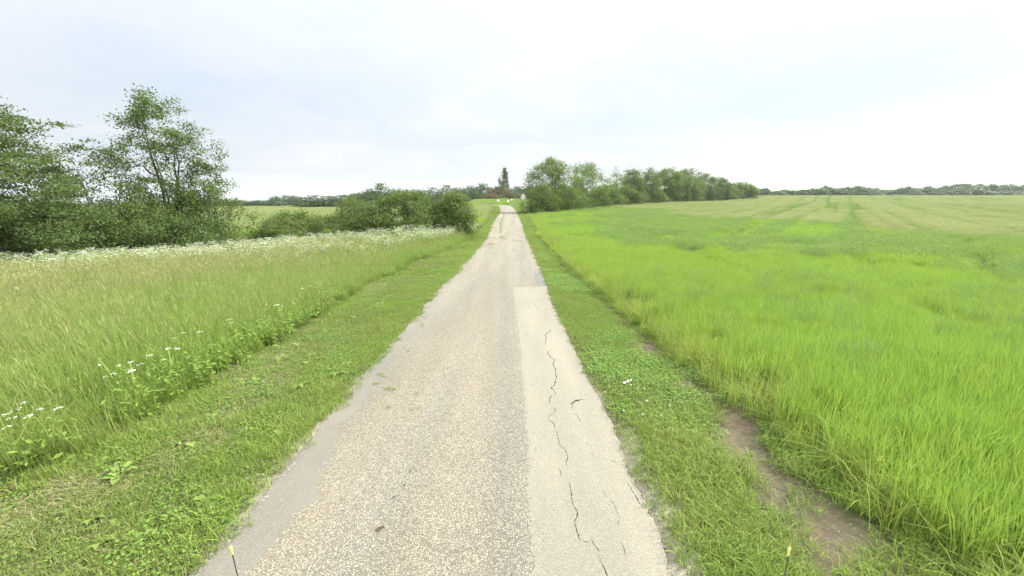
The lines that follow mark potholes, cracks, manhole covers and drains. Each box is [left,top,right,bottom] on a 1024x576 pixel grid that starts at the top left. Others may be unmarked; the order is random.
crack [545,330,608,576]
